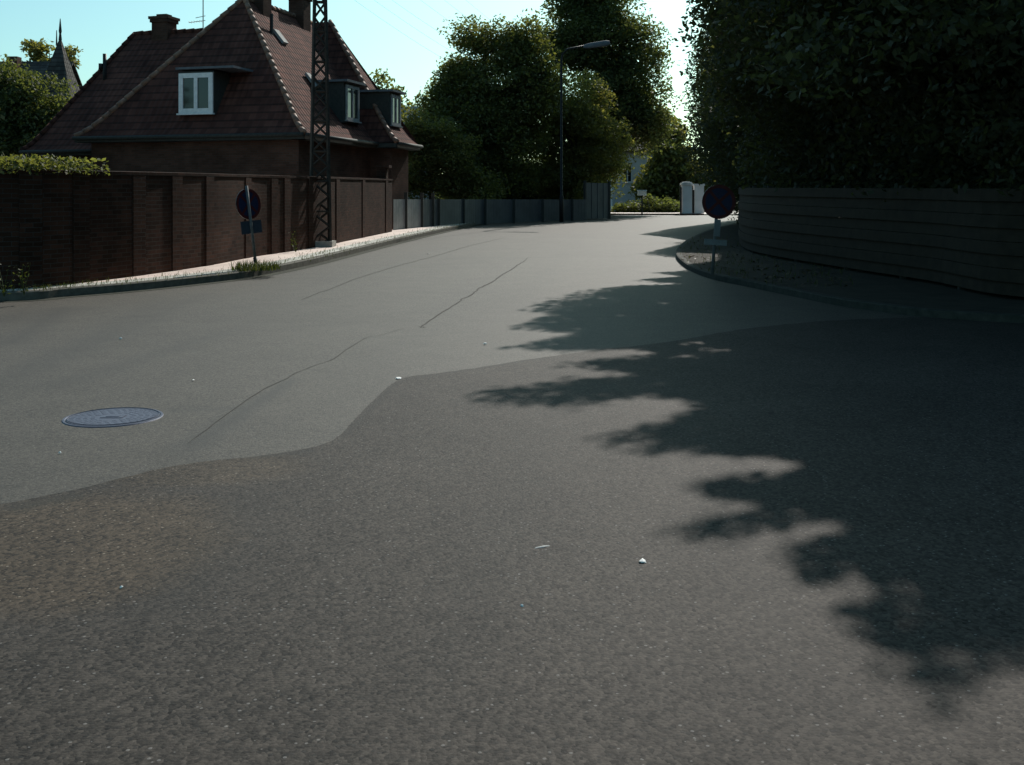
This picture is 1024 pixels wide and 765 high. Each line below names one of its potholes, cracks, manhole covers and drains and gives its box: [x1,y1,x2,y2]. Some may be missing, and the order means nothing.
crack [192,330,397,440]
manhole cover [61,407,164,428]
crack [301,238,501,300]
